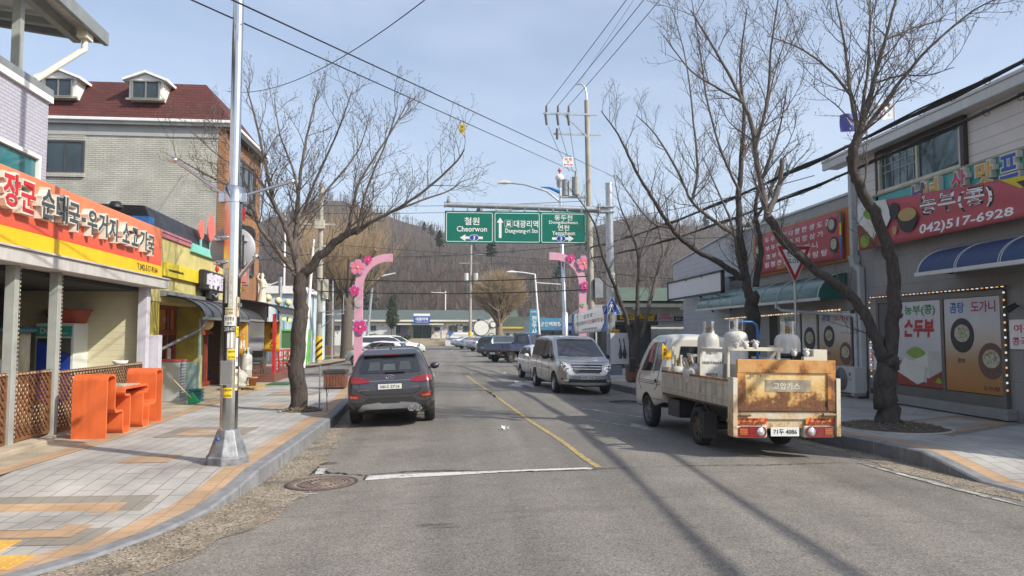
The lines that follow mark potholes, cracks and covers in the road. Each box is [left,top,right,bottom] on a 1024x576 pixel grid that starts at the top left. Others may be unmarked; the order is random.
manhole cover [284,476,359,492]
